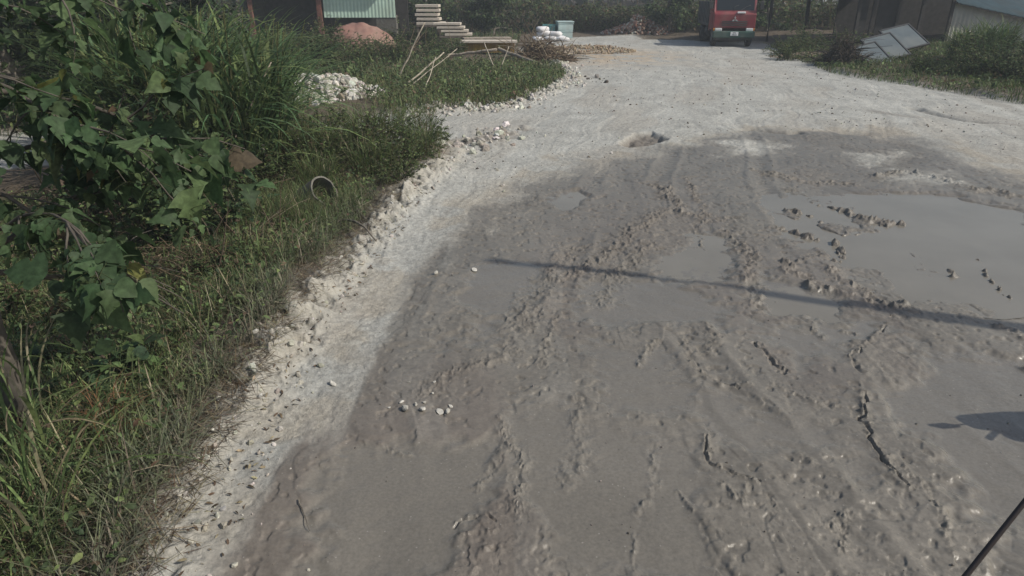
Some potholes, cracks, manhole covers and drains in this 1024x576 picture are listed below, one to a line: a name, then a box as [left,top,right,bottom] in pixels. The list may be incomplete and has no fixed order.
pothole [541,187,594,212]
pothole [617,130,671,148]
